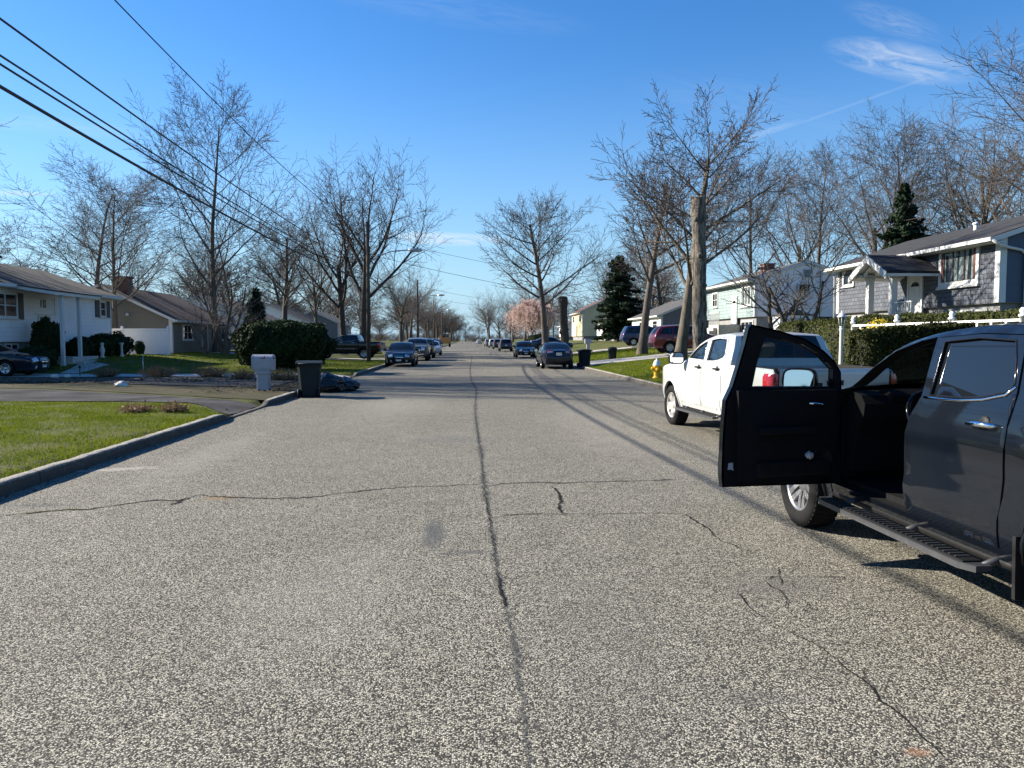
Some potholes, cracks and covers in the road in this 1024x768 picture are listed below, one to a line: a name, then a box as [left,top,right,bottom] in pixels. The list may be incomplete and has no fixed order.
crack [2,484,466,516]
crack [739,569,947,759]
